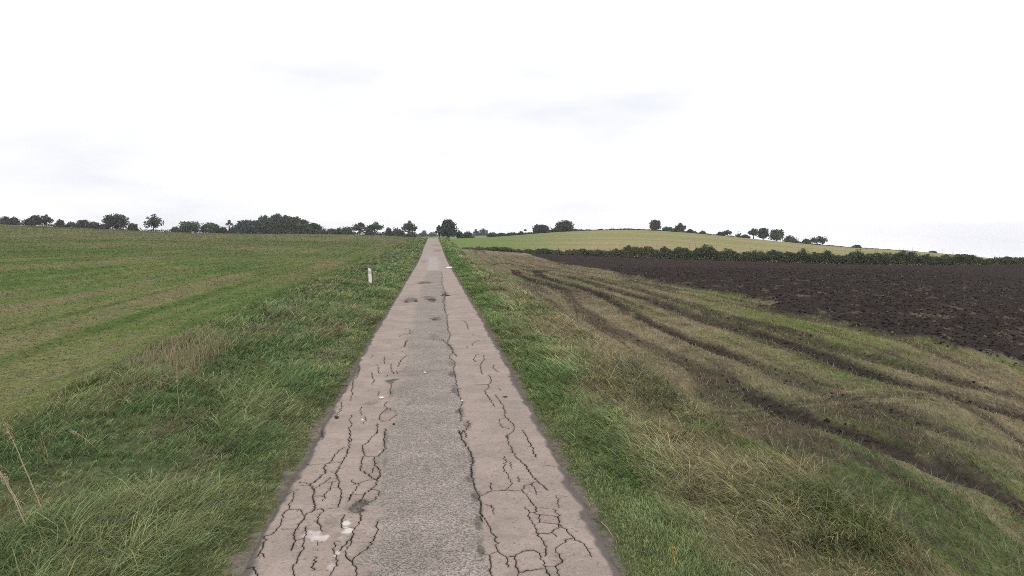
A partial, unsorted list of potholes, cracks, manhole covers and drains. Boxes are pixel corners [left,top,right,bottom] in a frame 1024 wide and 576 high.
crack [247,331,410,576]
crack [451,321,592,576]
pothole [349,499,370,513]
